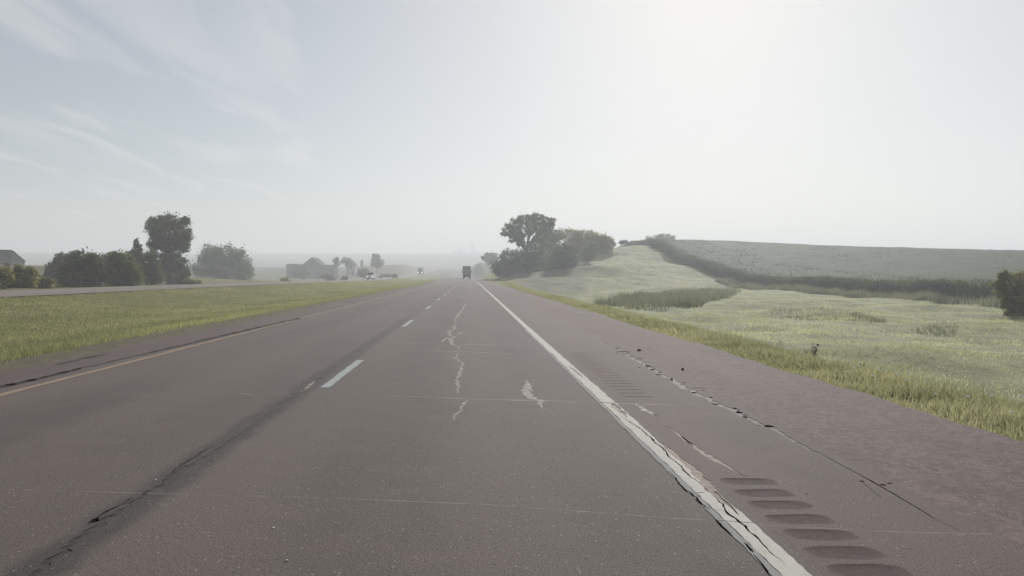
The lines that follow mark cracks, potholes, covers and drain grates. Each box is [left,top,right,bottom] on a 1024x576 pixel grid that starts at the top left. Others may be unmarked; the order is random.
crack [385,304,773,576]
